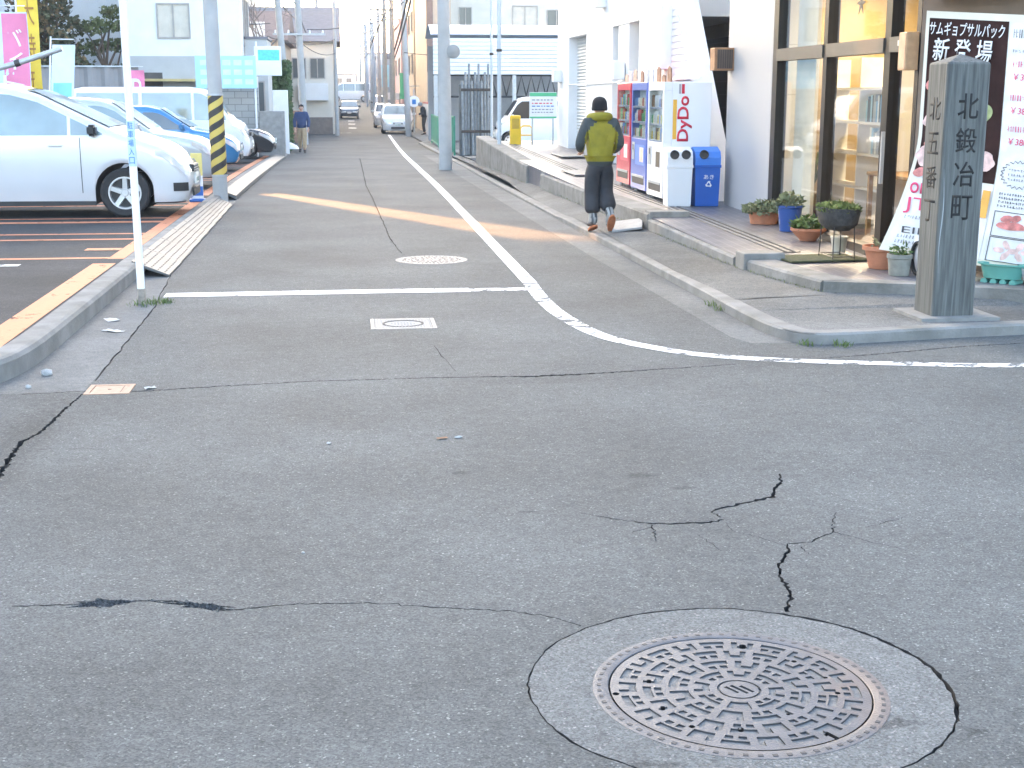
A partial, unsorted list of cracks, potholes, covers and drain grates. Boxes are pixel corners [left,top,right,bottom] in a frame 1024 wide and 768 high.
manhole cover [593,632,891,759]
manhole cover [83,384,136,395]
crack [0,394,82,478]
manhole cover [370,318,437,330]
crack [11,474,960,768]
crack [359,159,402,253]
manhole cover [396,255,467,264]
